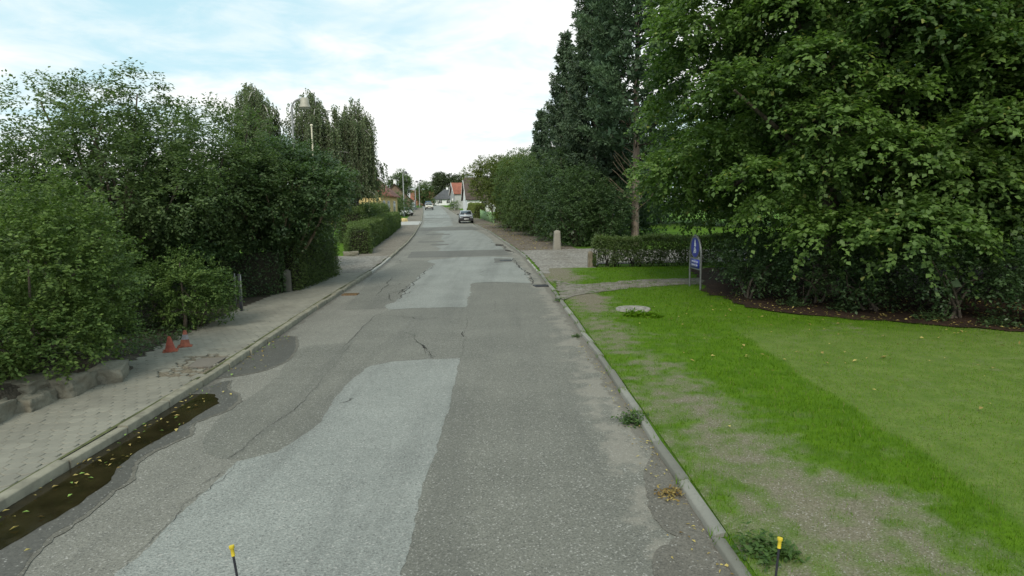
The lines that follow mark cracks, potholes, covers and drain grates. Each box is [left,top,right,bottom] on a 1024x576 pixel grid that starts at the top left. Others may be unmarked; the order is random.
crack [372,265,435,360]
